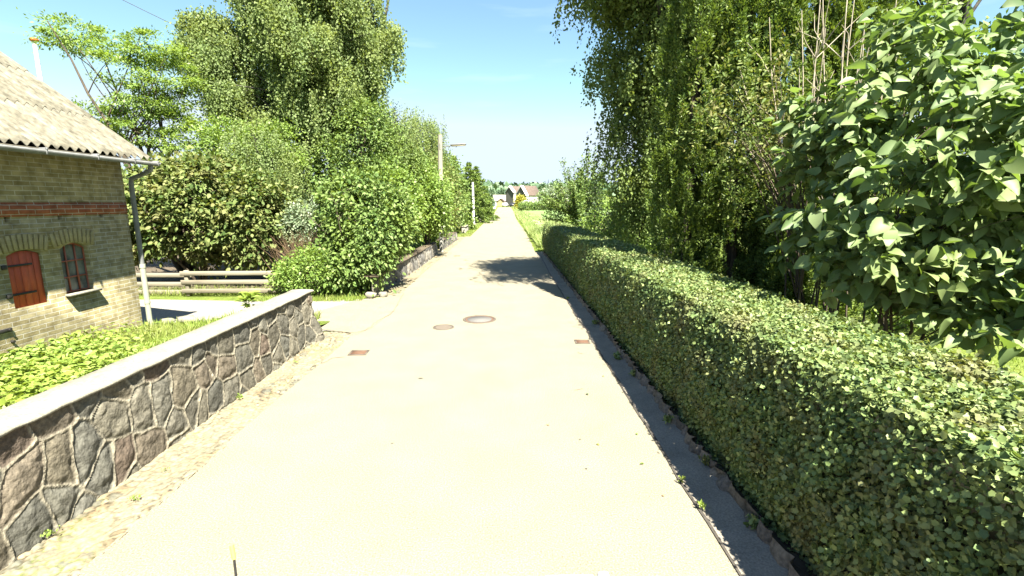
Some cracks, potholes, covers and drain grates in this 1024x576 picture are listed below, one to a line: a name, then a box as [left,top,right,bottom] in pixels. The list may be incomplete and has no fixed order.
manhole cover [463,315,496,324]
